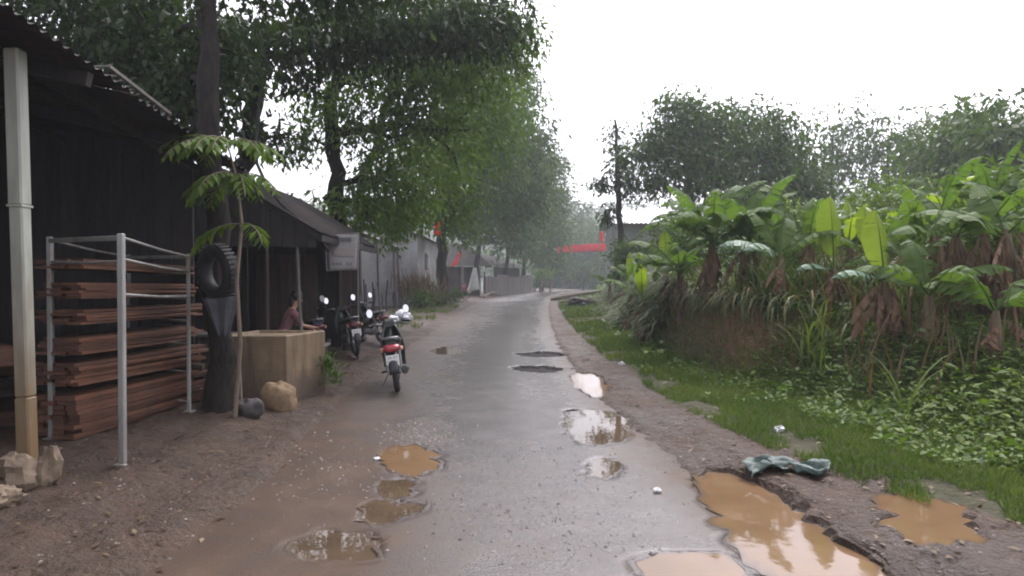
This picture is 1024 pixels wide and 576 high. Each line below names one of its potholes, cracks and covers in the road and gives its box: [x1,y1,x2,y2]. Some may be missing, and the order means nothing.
pothole [870,492,991,550]
pothole [377,476,421,503]
pothole [559,409,641,446]
pothole [282,529,396,564]
pothole [690,465,899,576]
pothole [569,372,616,399]
pothole [354,498,430,527]
pothole [628,550,756,576]
pothole [586,456,625,480]
pothole [509,365,566,374]
pothole [377,443,446,478]
pothole [429,346,466,355]
